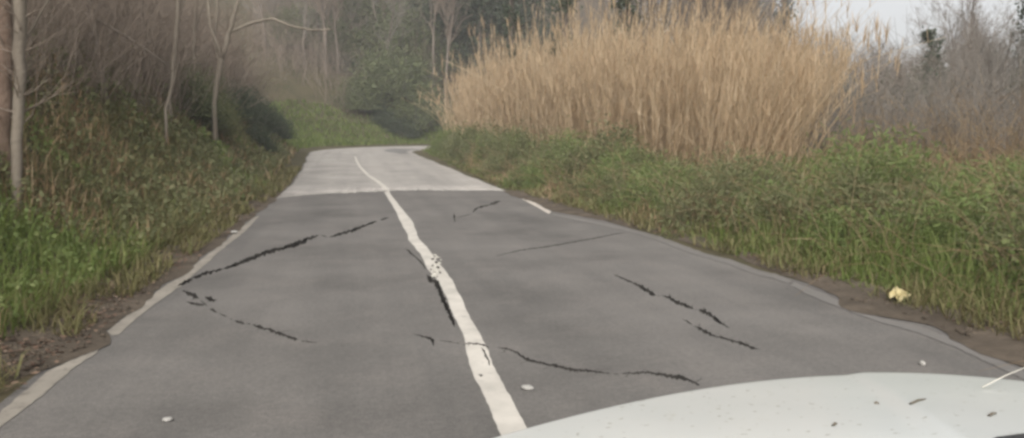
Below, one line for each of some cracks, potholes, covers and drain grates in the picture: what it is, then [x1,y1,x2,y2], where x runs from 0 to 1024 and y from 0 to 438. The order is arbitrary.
crack [178,217,389,343]
crack [613,274,757,349]
crack [498,232,626,256]
crack [407,250,701,385]
